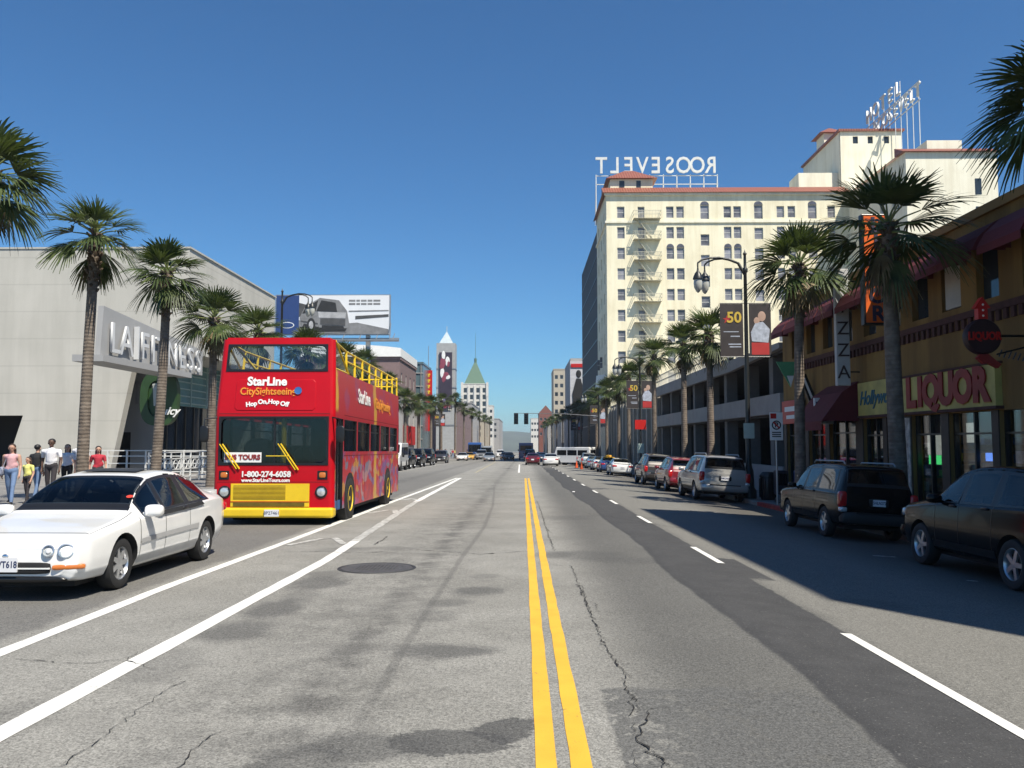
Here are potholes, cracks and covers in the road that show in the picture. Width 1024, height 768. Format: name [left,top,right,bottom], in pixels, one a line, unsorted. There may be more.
manhole cover [337,562,416,574]
crack [570,566,673,767]
crack [61,679,188,766]
